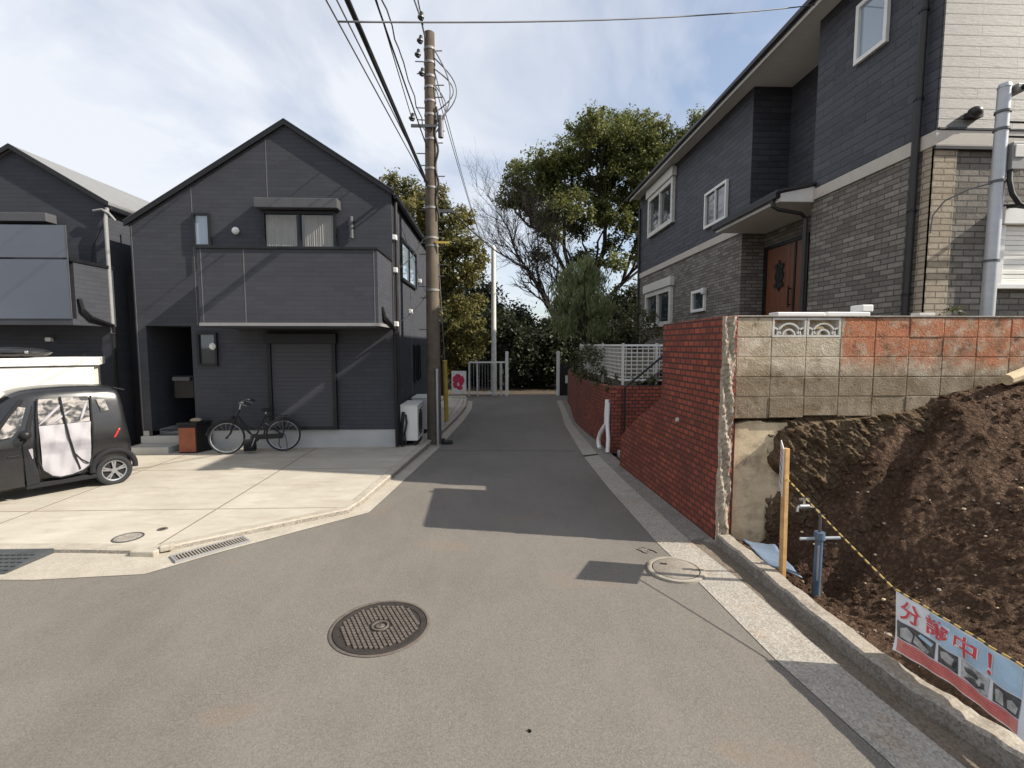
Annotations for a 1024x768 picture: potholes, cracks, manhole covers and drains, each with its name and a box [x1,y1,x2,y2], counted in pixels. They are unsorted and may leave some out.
manhole cover [647,556,705,584]
drain grate [169,536,250,564]
manhole cover [111,532,145,543]
manhole cover [328,600,430,658]
